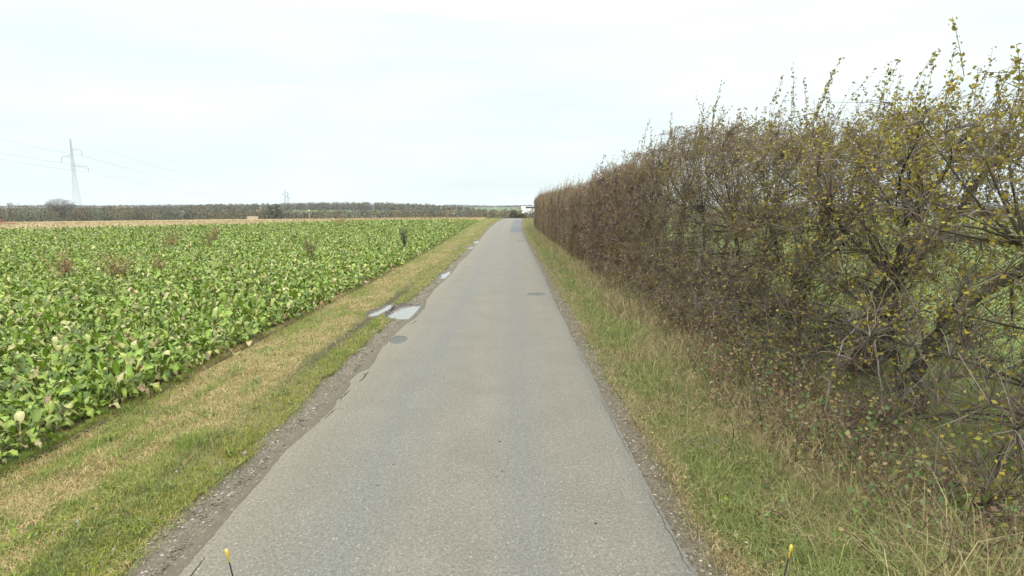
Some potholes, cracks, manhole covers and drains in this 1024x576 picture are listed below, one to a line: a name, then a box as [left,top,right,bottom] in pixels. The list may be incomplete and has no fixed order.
pothole [384,303,424,320]
